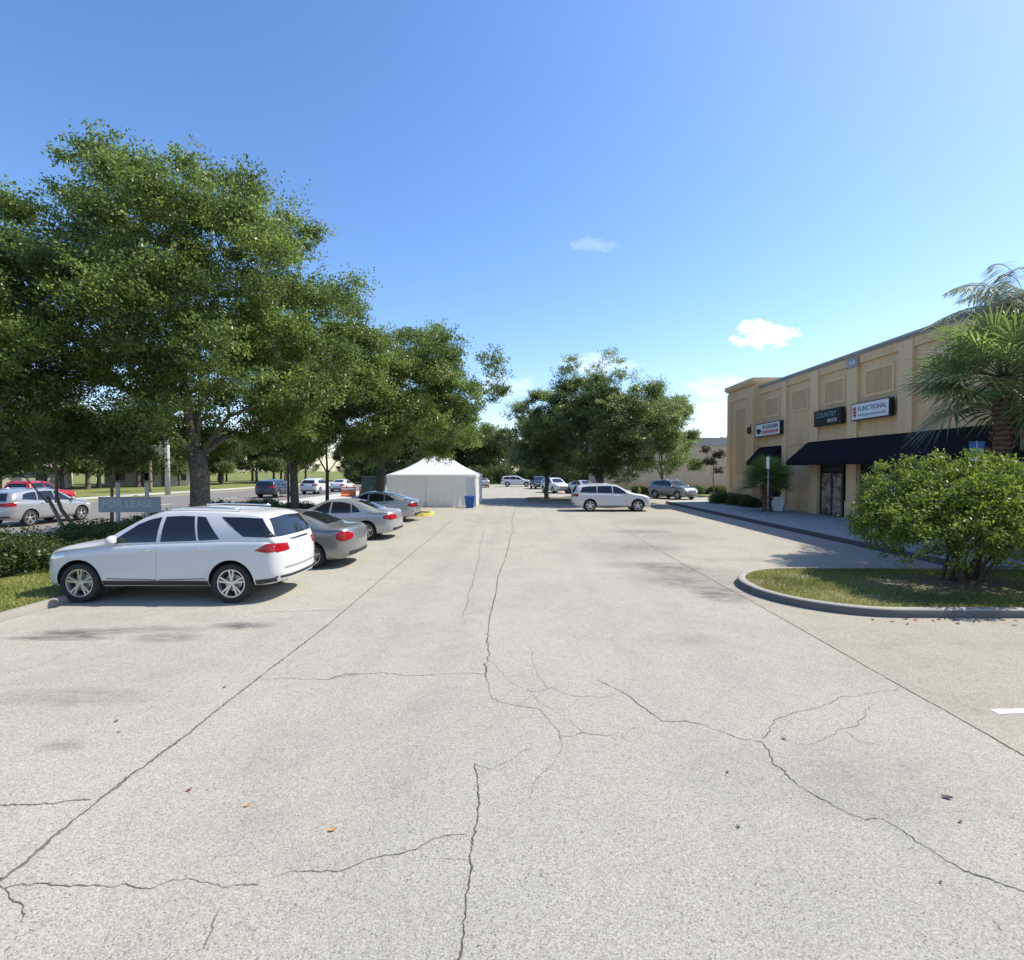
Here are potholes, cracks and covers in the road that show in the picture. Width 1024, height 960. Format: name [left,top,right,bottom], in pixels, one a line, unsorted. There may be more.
crack [0,748,532,960]
crack [255,511,1023,891]
